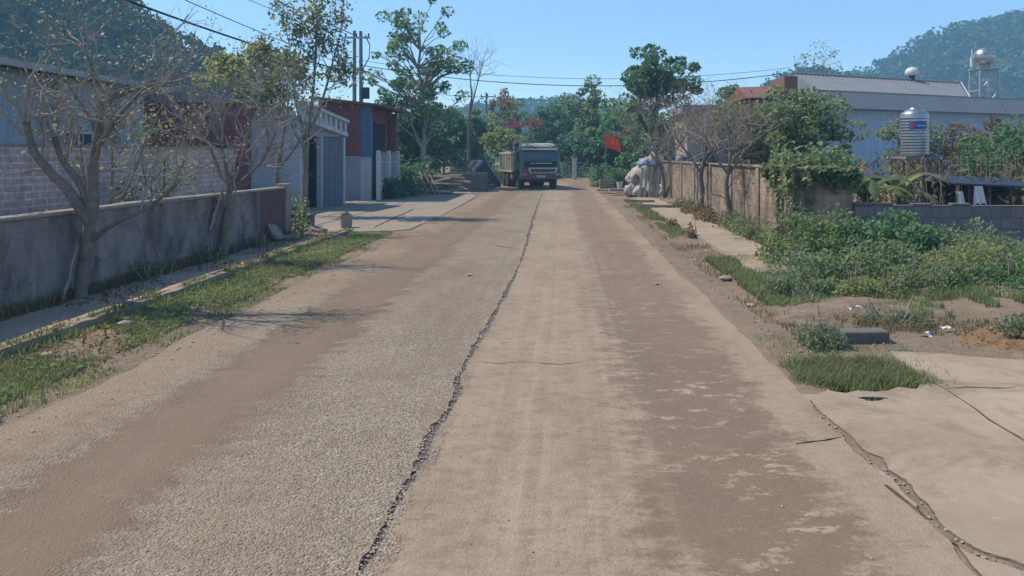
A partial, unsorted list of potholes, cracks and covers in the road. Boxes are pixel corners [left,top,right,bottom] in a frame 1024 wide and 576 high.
crack [356,193,581,576]
crack [796,379,1024,576]
